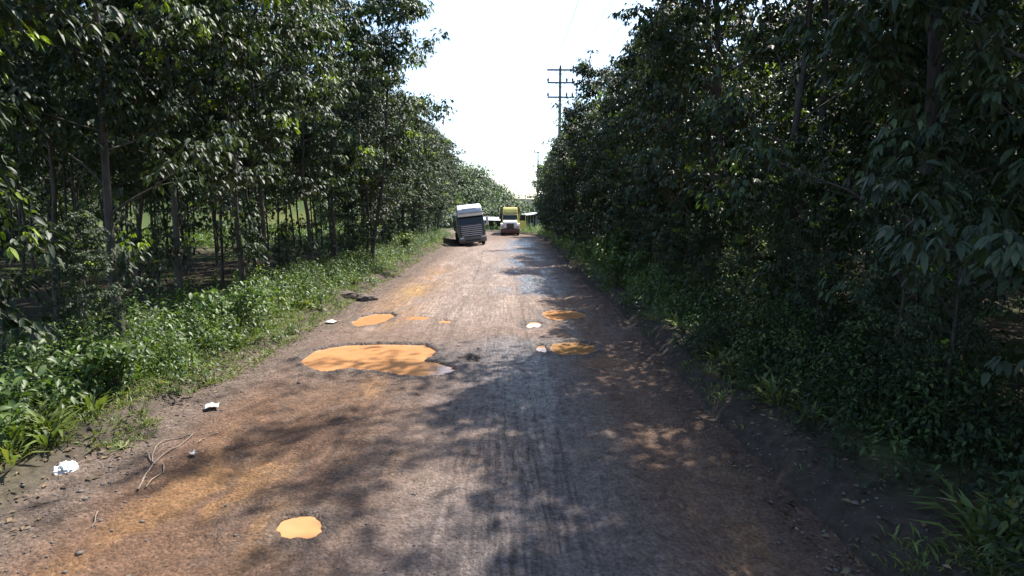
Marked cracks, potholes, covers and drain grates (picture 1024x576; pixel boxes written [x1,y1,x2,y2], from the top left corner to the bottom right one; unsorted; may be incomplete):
pothole [398,314,440,322]
pothole [341,311,404,328]
pothole [523,338,608,358]
pothole [286,340,471,380]
pothole [516,307,596,329]
